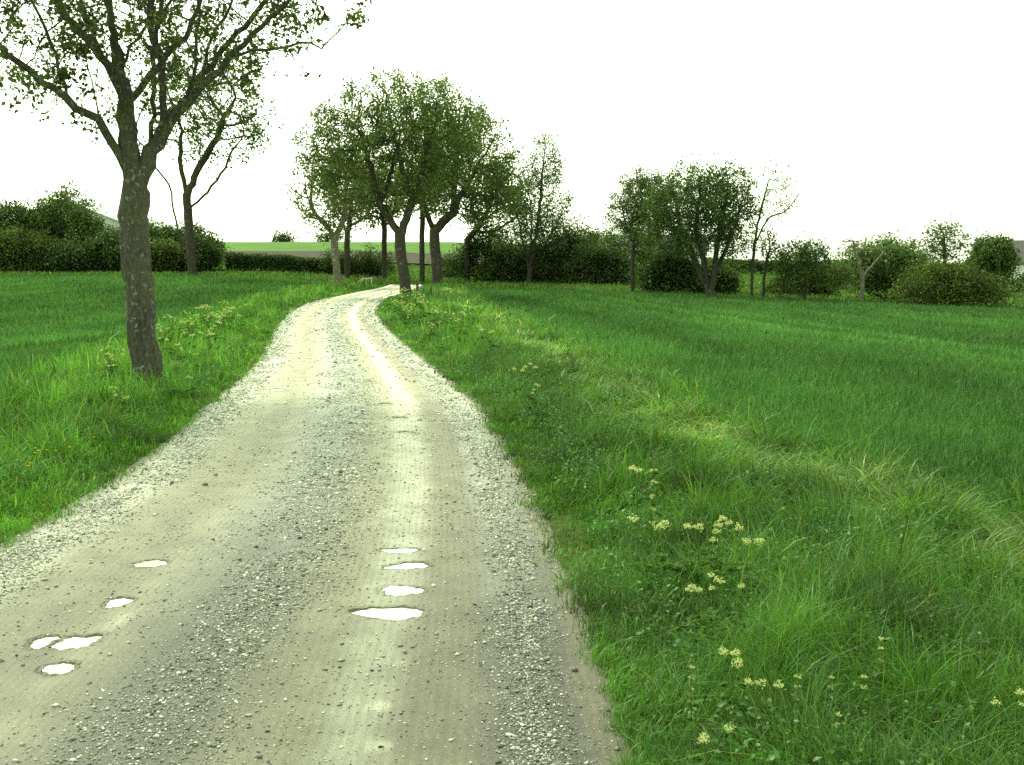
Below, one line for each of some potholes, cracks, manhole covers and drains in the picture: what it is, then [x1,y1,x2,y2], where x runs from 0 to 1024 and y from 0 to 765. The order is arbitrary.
pothole [25,634,65,650]
pothole [375,585,432,597]
pothole [128,558,172,569]
pothole [36,660,82,677]
pothole [101,596,139,610]
pothole [338,604,434,621]
pothole [43,631,111,651]
pothole [375,560,434,570]
